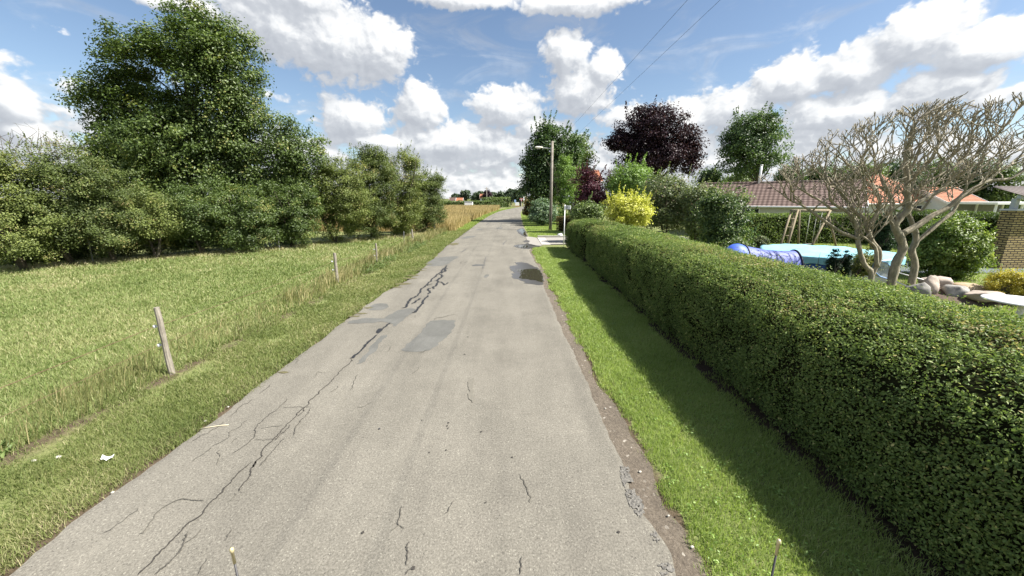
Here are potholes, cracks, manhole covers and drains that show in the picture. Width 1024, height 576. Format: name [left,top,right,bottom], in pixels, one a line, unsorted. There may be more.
crack [392,506,411,574]
pothole [619,465,645,517]
crack [105,359,371,575]
